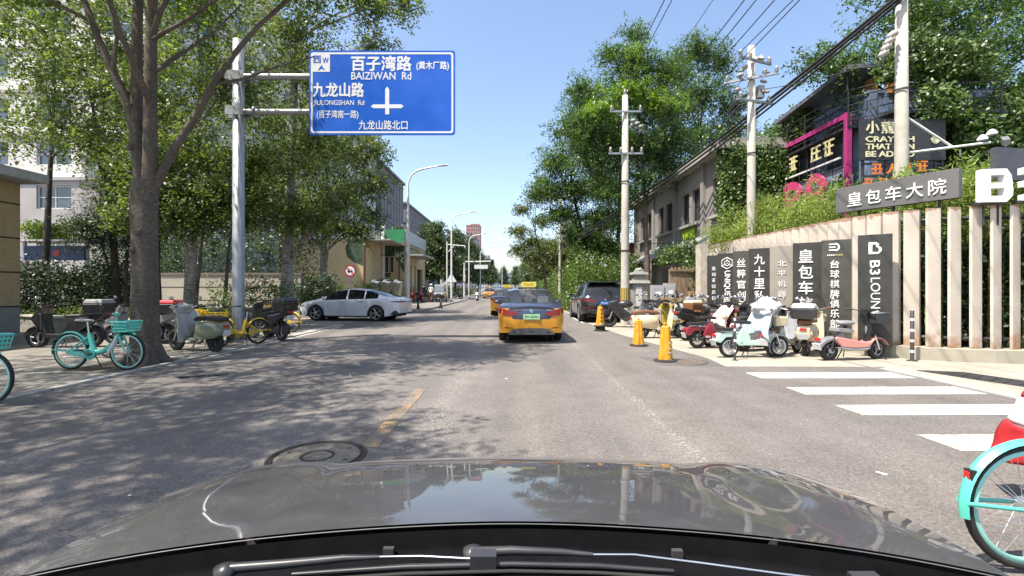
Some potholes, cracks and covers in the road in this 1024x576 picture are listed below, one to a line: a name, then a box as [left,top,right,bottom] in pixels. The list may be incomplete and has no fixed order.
manhole cover [264,440,367,465]
